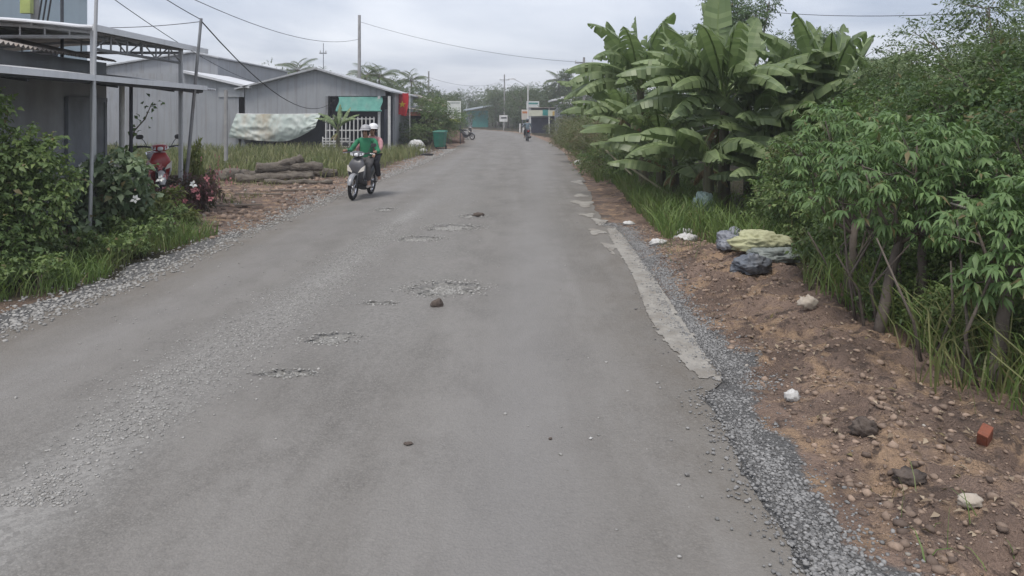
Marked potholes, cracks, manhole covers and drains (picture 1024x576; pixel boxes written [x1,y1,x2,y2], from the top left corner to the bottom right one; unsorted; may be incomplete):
pothole [246,367,324,379]
pothole [390,279,499,299]
pothole [388,234,449,243]
pothole [297,330,368,346]
pothole [418,223,490,232]
